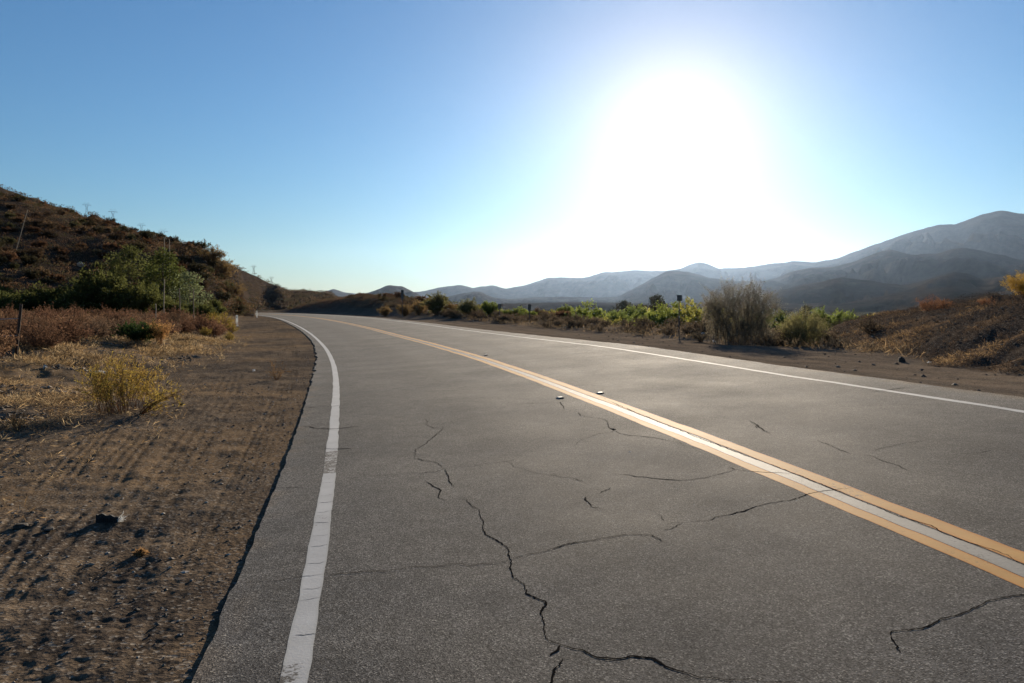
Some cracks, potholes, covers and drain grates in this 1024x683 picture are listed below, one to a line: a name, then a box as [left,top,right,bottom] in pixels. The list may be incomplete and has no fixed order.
crack [336,421,797,683]
crack [890,594,1024,653]
